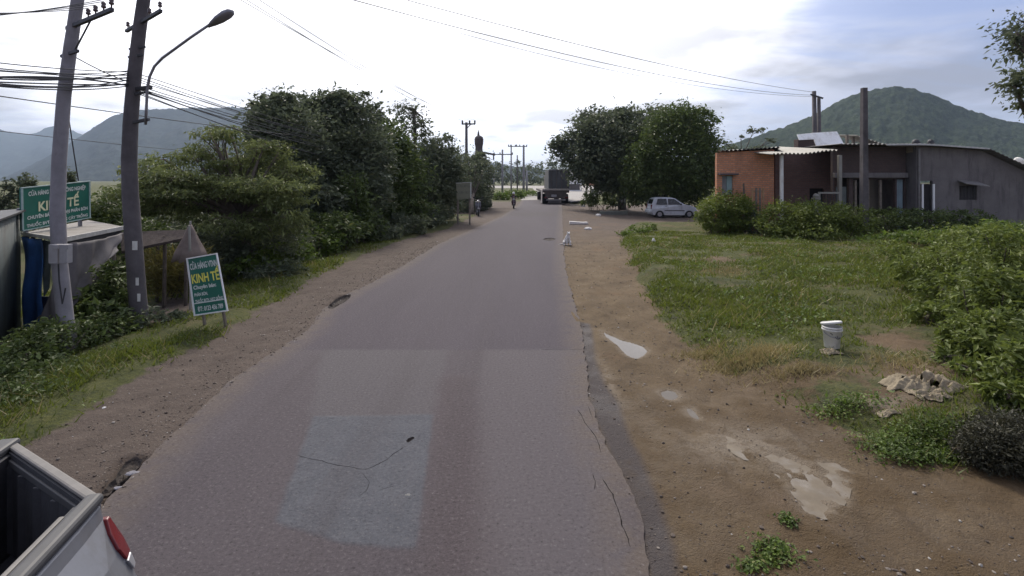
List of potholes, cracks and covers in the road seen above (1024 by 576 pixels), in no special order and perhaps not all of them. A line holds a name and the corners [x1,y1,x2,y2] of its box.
pothole [102,457,143,498]
pothole [328,294,351,309]
crack [593,476,630,545]
